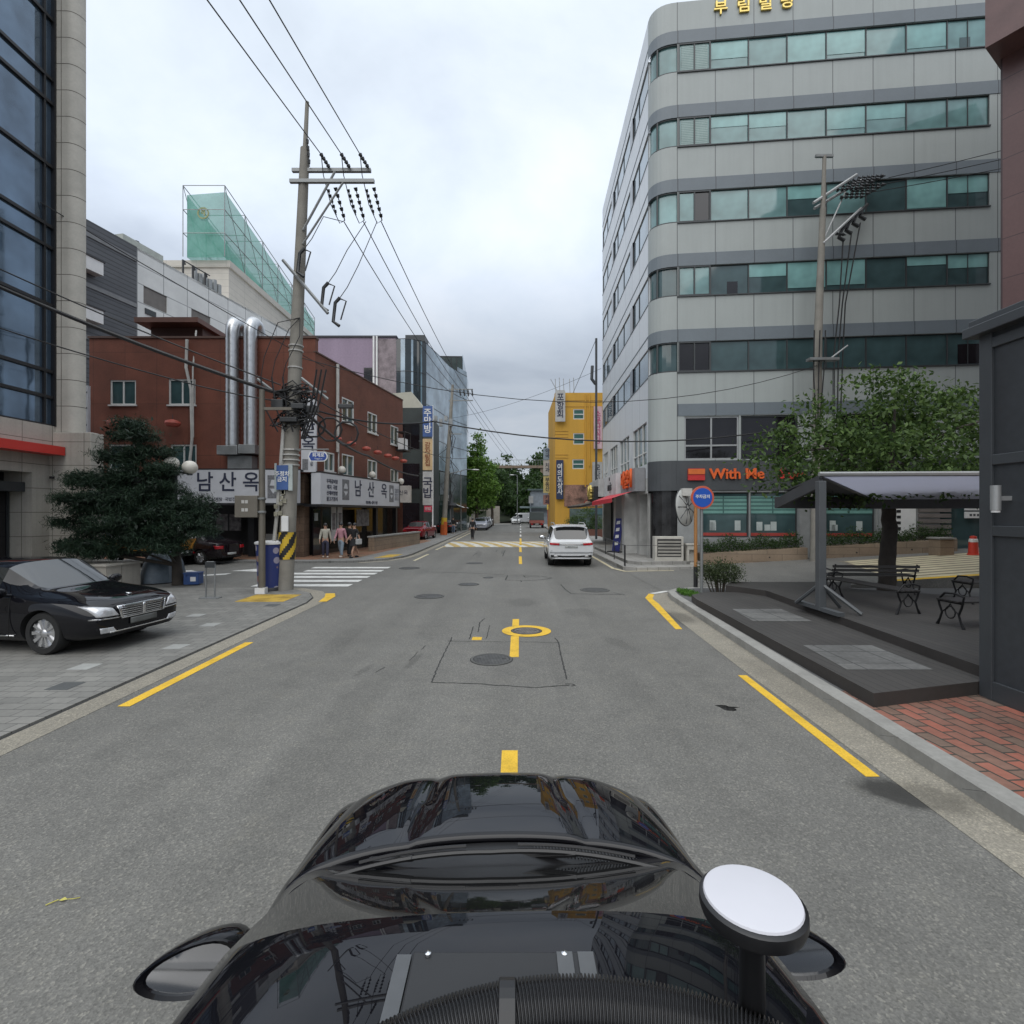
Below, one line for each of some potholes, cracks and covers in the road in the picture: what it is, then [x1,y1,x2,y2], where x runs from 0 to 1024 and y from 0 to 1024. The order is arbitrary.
manhole cover [502,625,551,637]
manhole cover [470,653,513,666]
